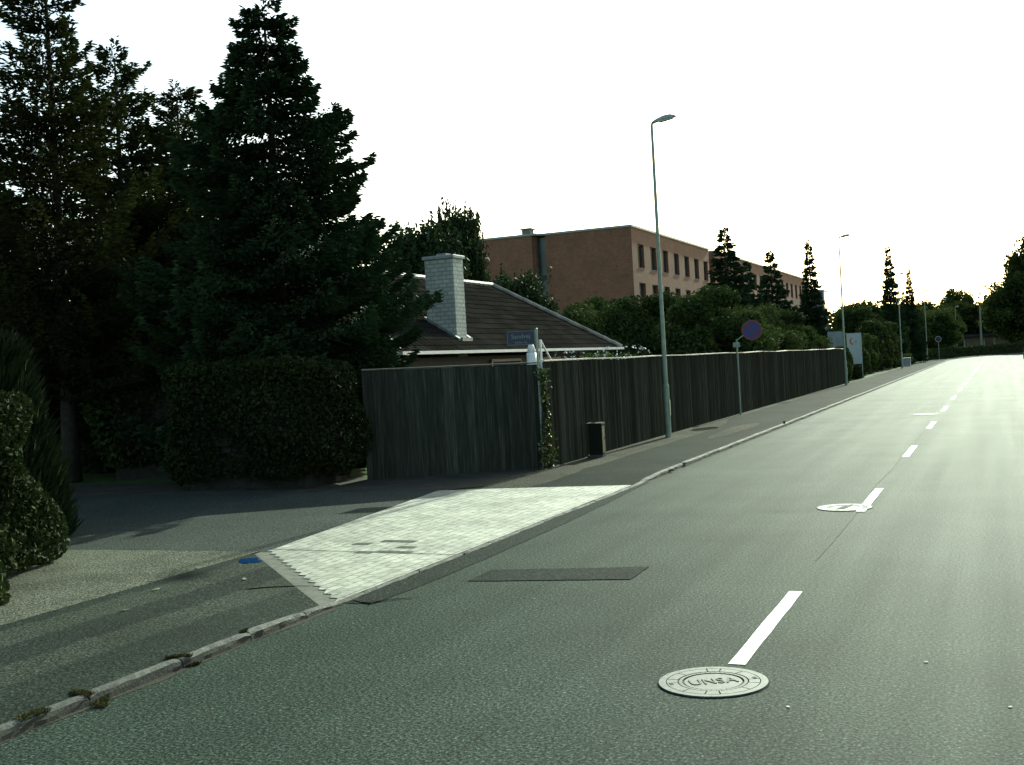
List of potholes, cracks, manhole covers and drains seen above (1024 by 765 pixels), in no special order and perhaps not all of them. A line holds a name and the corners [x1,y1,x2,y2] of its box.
manhole cover [657,667,770,698]
